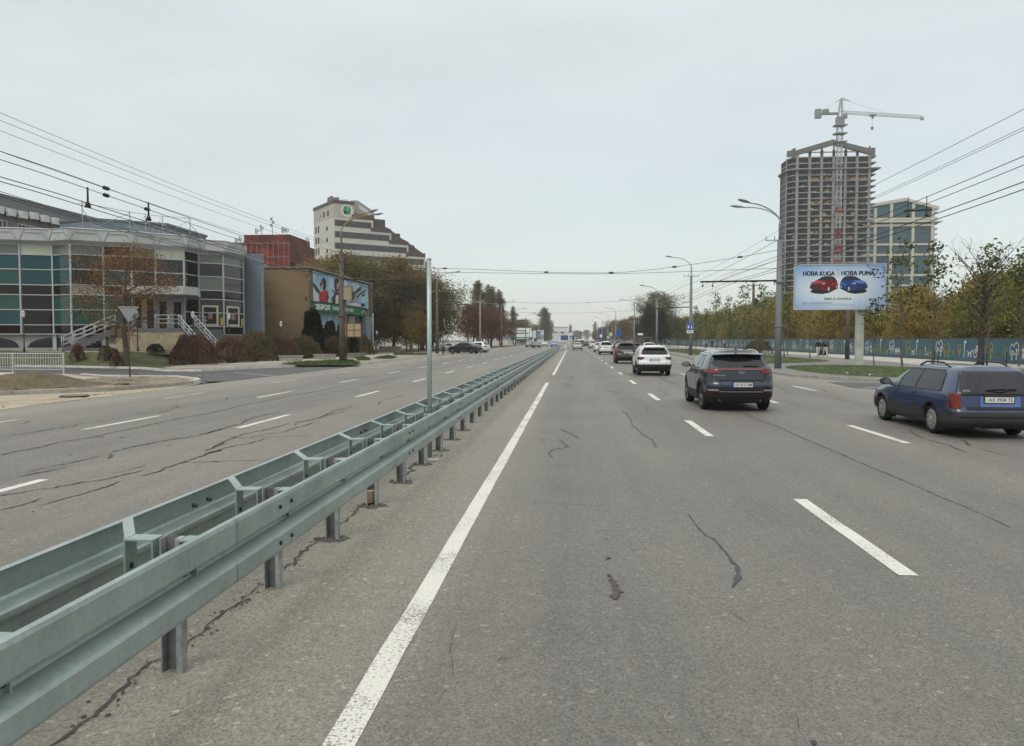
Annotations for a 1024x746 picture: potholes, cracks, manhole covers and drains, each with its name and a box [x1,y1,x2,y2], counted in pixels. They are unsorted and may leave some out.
crack [0,399,348,510]
crack [688,514,742,587]
